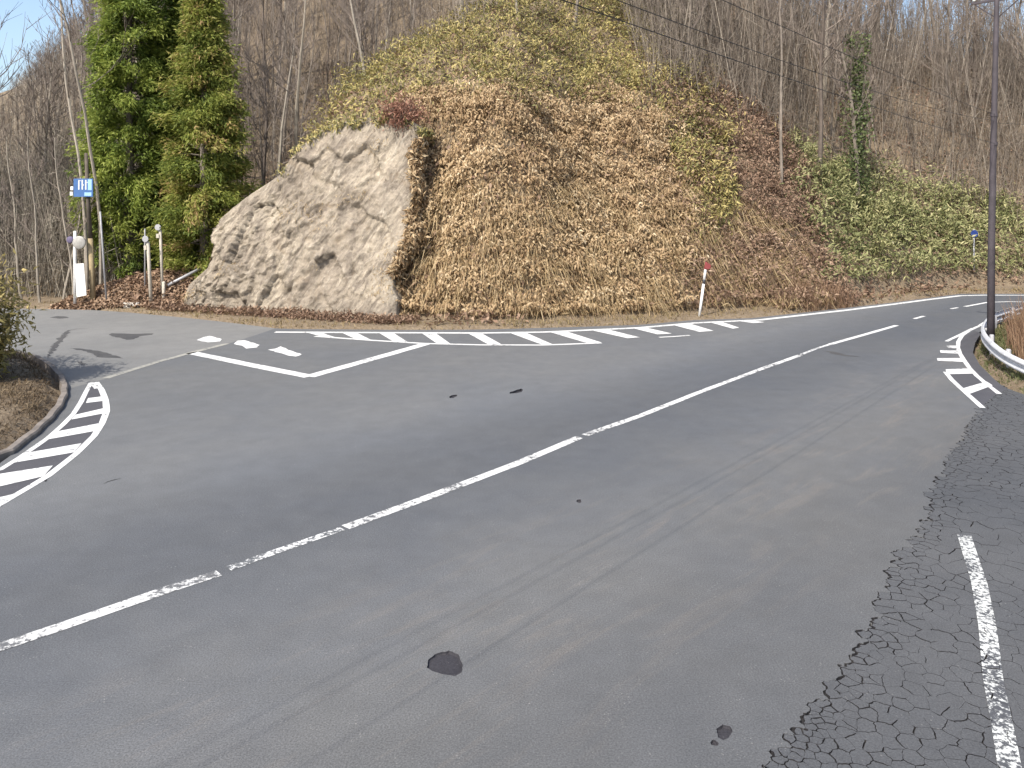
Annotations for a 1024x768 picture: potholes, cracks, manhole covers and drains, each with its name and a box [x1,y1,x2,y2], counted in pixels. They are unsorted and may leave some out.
crack [762,386,1024,768]
pothole [716,725,732,740]
pothole [427,651,463,676]
